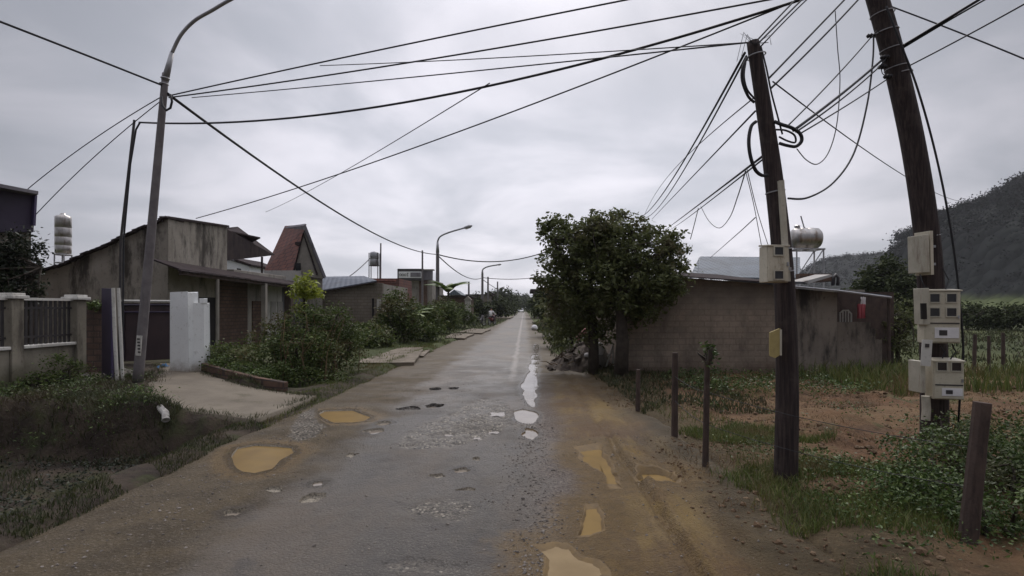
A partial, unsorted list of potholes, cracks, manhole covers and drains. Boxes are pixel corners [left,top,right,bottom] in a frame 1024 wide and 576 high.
pothole [514,409,539,424]
pothole [520,344,540,407]
pothole [318,409,371,423]
pothole [231,444,295,473]
pothole [521,428,538,440]
pothole [299,492,326,503]
pothole [223,507,246,516]
